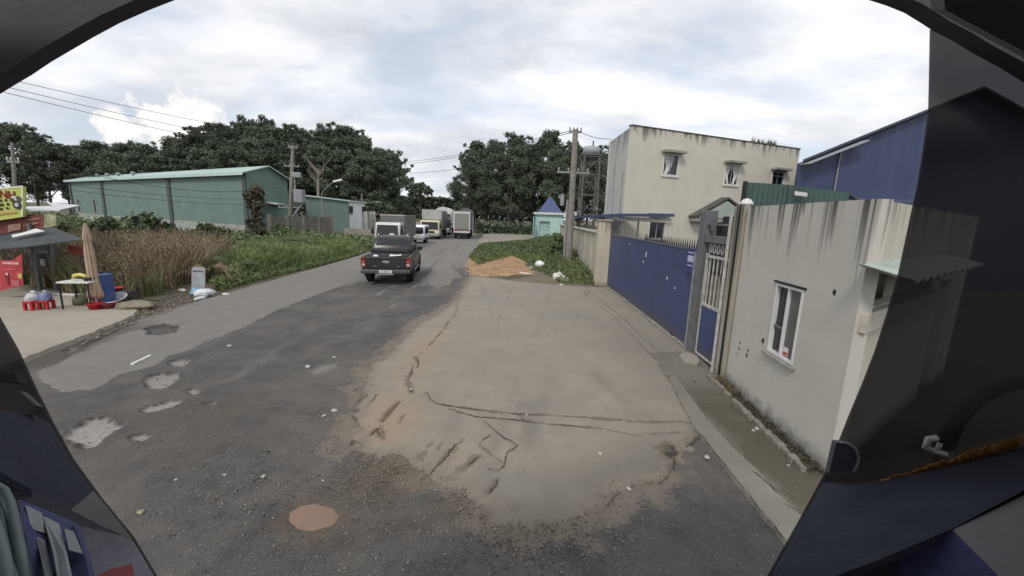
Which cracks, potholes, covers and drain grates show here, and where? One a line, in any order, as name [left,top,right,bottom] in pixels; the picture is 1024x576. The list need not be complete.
pothole [123,430,159,444]
pothole [166,357,196,367]
pothole [180,387,206,395]
pothole [140,370,186,390]
crack [420,393,690,493]
pothole [137,398,185,414]
crack [604,437,700,507]
pothole [141,322,183,336]
pothole [657,442,683,461]
pothole [60,414,133,451]
